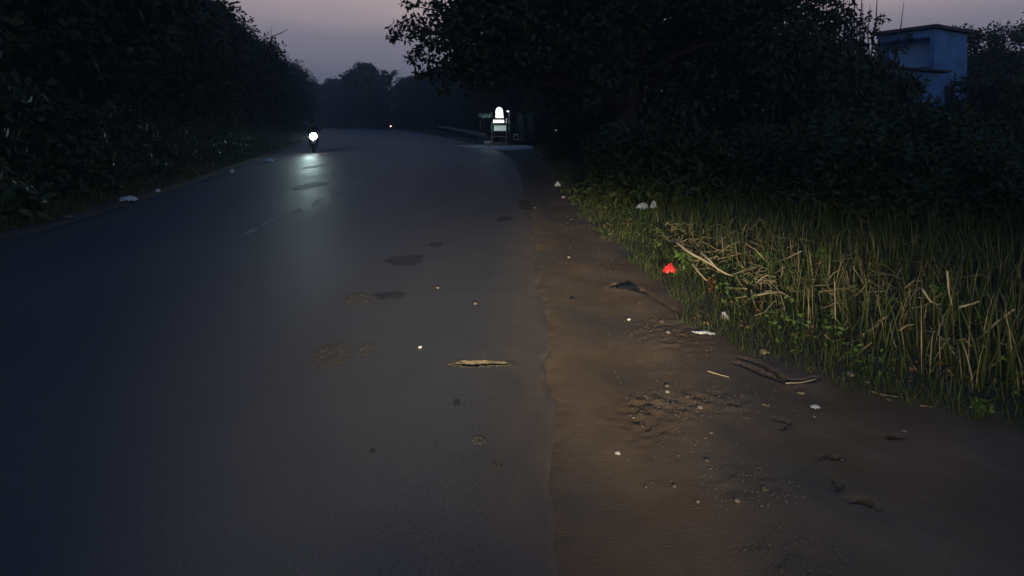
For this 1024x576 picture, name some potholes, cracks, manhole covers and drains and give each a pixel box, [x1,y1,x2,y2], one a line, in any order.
pothole [445,359,521,368]
